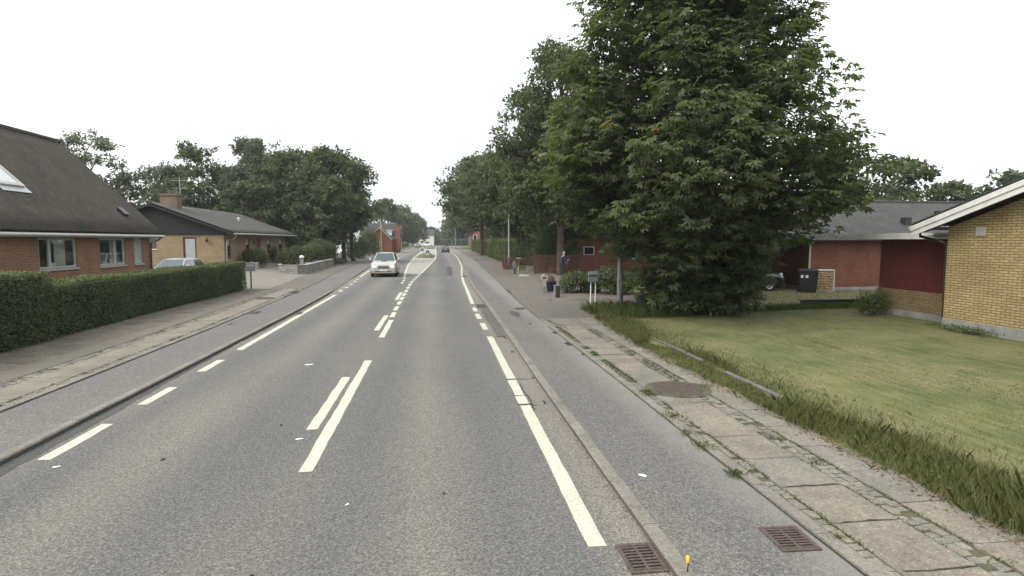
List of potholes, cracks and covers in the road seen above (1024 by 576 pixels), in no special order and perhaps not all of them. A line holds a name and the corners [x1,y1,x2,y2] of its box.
manhole cover [645,381,712,398]
